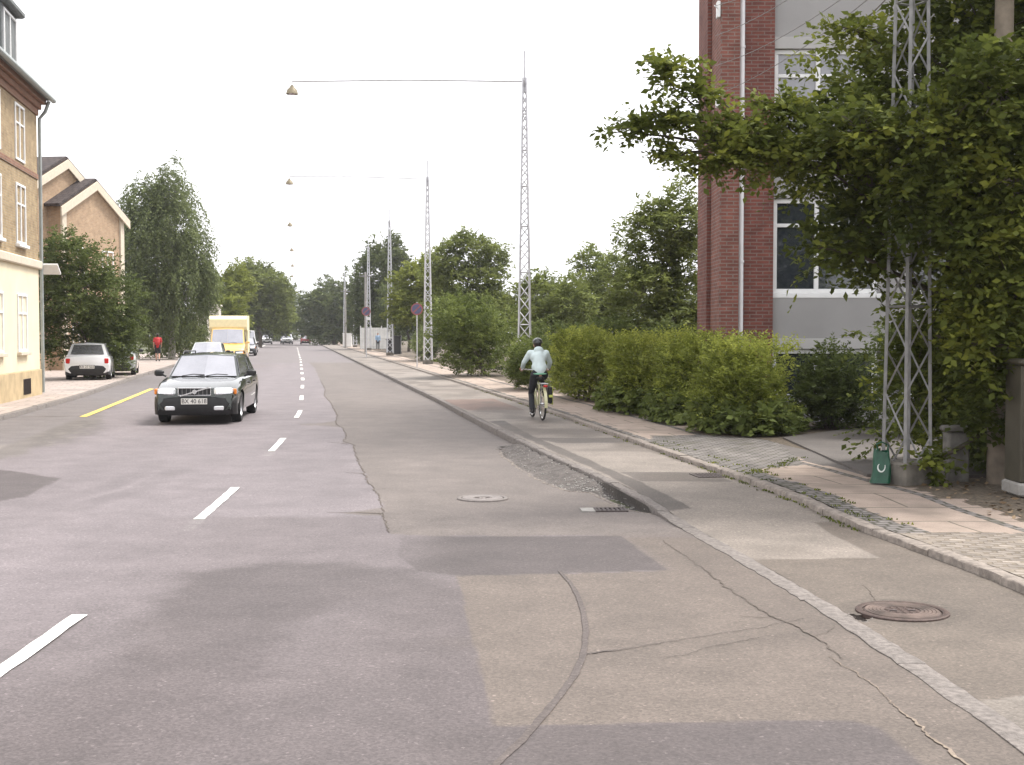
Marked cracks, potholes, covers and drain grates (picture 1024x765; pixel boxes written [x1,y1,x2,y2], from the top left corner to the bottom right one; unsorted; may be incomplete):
crack [492,540,970,765]
crack [307,382,389,532]
manhole cover [855,601,950,622]
pothole [496,444,652,514]
manhole cover [457,494,508,502]
